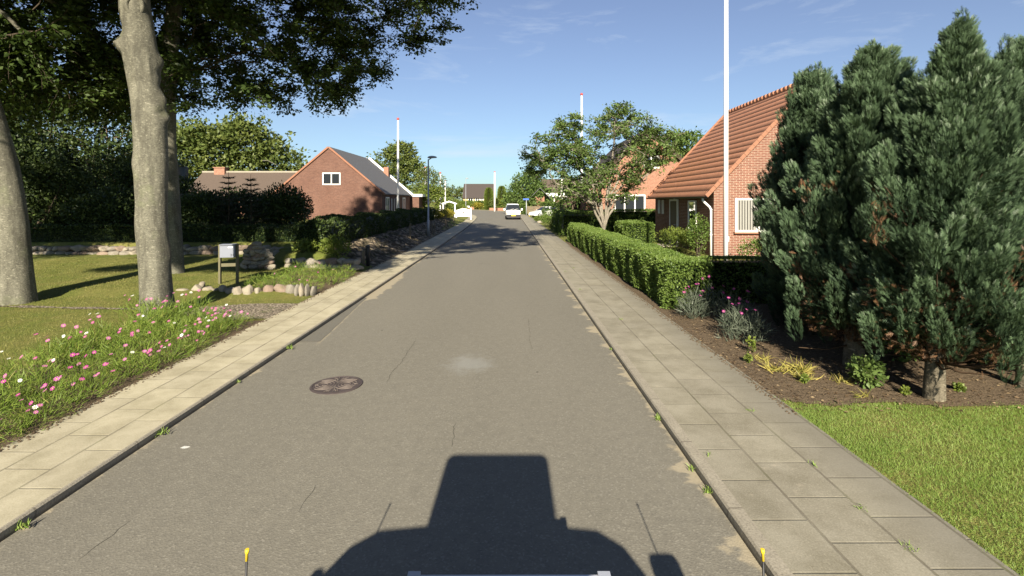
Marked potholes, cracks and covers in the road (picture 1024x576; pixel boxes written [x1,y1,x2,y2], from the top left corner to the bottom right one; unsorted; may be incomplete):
manhole cover [309,376,363,395]
